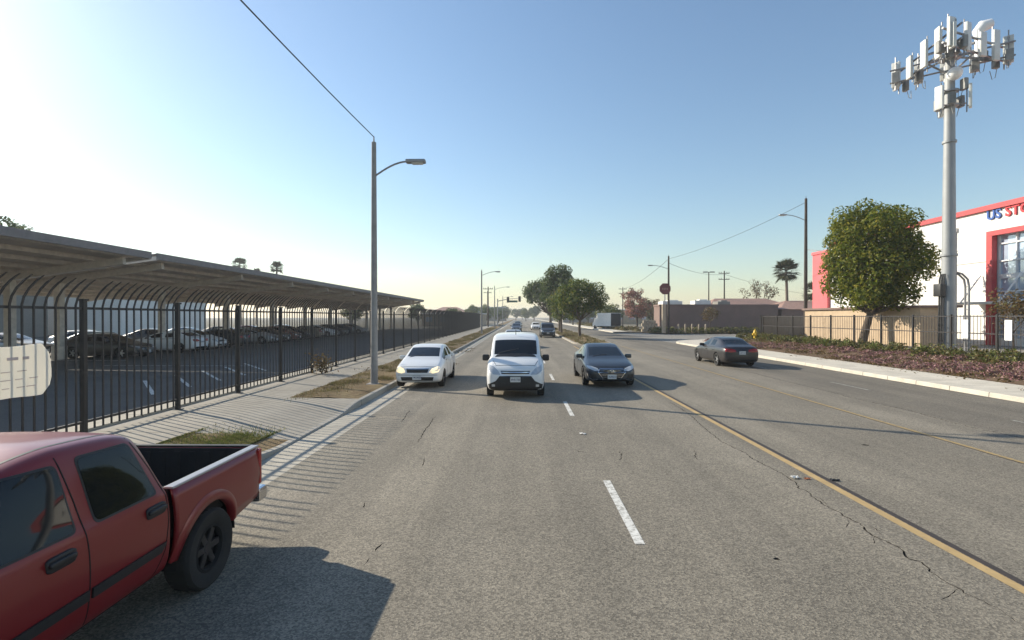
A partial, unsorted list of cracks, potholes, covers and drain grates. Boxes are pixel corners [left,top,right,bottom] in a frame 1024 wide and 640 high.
crack [674,404,1015,621]
